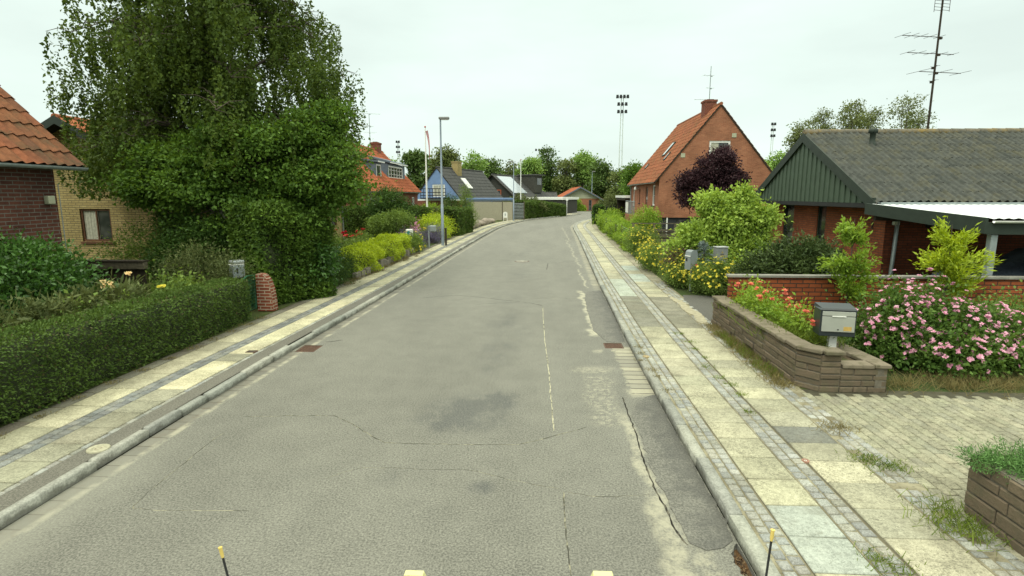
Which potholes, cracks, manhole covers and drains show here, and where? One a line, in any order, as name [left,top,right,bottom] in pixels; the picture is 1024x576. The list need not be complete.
crack [132,435,241,511]
utility cover [86,444,111,454]
crack [244,295,586,445]
crack [328,397,688,576]
